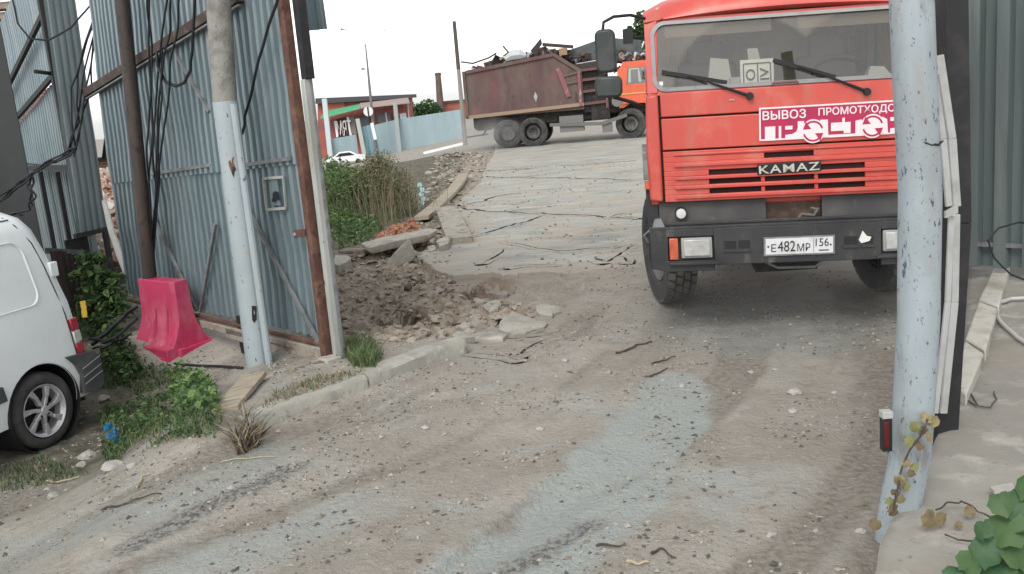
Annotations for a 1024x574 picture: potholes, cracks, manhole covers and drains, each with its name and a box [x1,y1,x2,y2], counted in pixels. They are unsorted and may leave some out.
pothole [457,282,526,304]
crack [455,192,643,270]
pothole [370,307,430,328]
